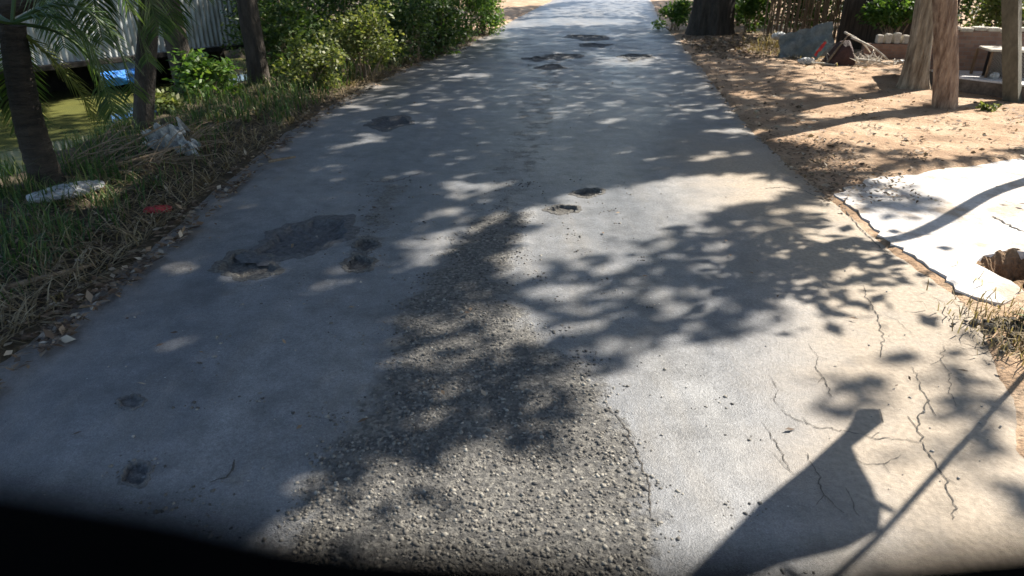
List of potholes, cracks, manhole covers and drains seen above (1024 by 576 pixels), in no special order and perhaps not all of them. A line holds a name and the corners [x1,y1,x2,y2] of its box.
pothole [616,53,656,62]
pothole [351,238,382,254]
crack [864,288,911,358]
pothole [235,214,361,266]
pothole [363,114,415,132]
pothole [115,393,148,411]
pothole [206,249,285,282]
crack [772,351,958,519]
pothole [117,460,155,489]
pothole [339,253,379,273]
pothole [542,204,582,215]
pothole [540,53,585,61]
